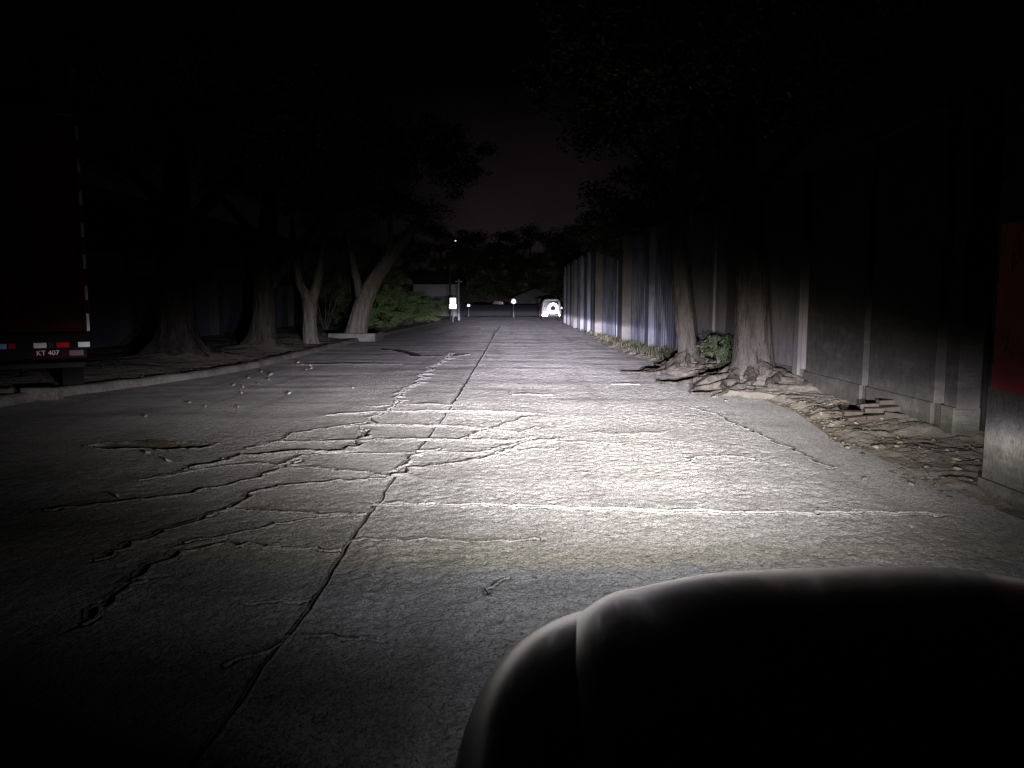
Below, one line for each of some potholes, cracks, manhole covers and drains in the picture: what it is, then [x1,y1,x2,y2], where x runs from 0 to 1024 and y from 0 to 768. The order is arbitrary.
crack [44,327,942,768]
pothole [82,439,221,451]
